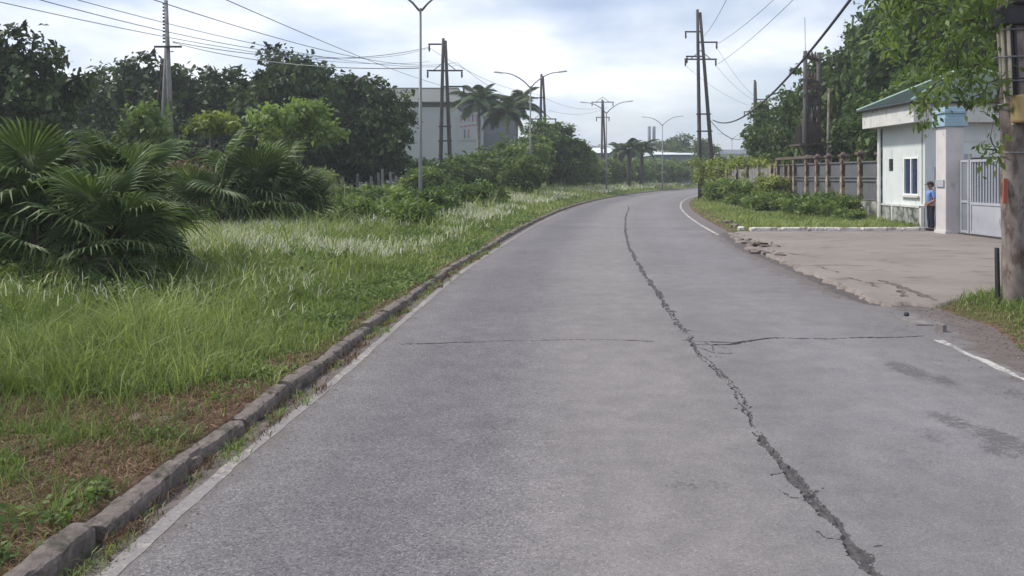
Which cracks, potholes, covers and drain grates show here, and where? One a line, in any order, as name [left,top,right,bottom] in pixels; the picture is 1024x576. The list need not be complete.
crack [624,205,918,576]
